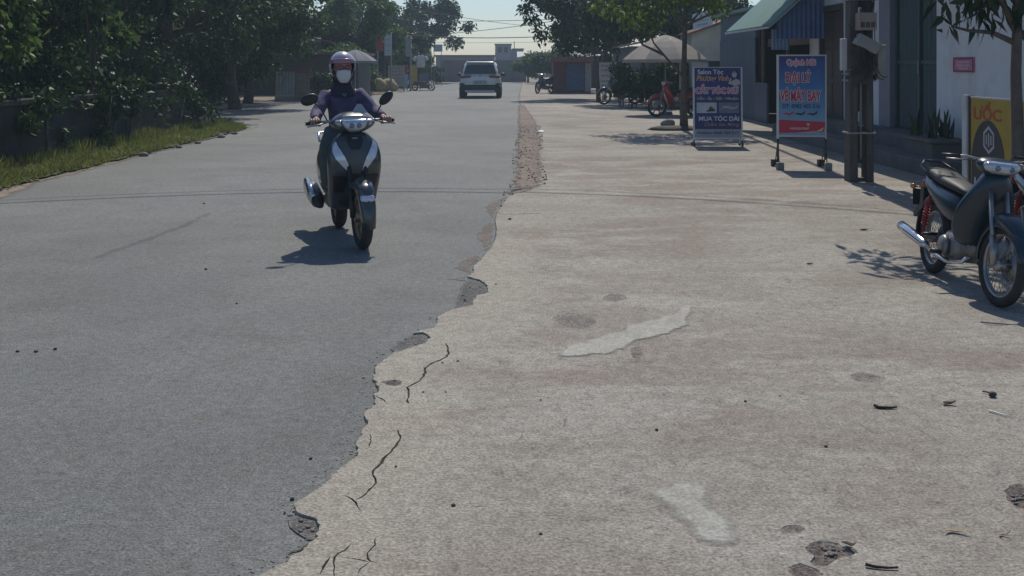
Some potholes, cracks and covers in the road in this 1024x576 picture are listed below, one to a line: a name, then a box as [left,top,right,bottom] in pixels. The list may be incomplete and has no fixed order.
crack [404,344,450,403]
pothole [288,515,318,541]
crack [283,539,376,576]
pothole [805,541,857,567]
crack [345,430,401,511]
pothole [455,278,488,308]
pothole [1003,484,1024,509]
pothole [788,563,824,576]
pothole [390,334,428,352]
